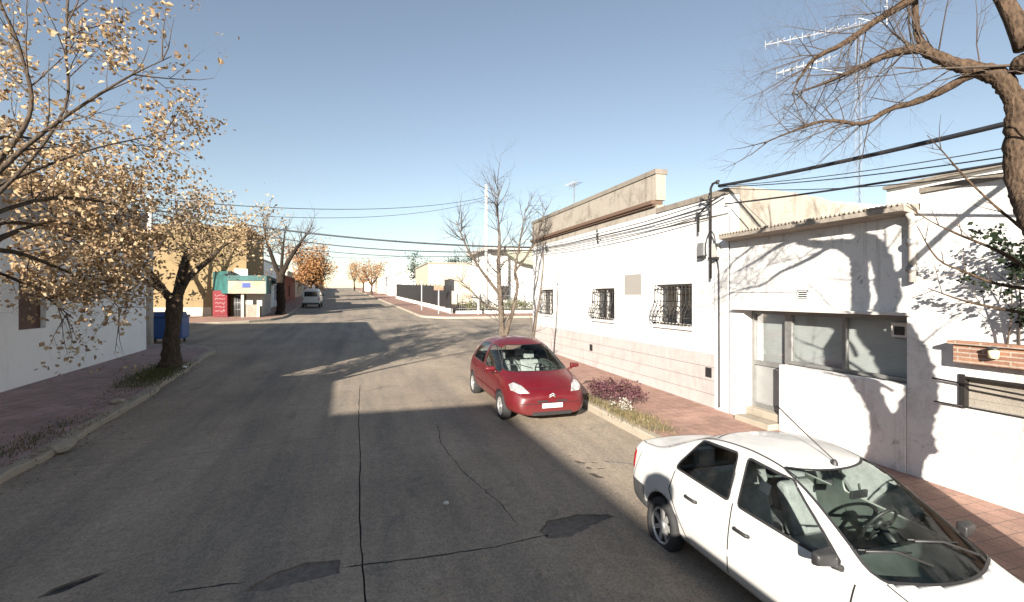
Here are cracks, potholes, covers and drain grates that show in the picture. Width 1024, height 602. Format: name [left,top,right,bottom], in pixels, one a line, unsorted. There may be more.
crack [169,535,548,593]
crack [437,424,513,519]
